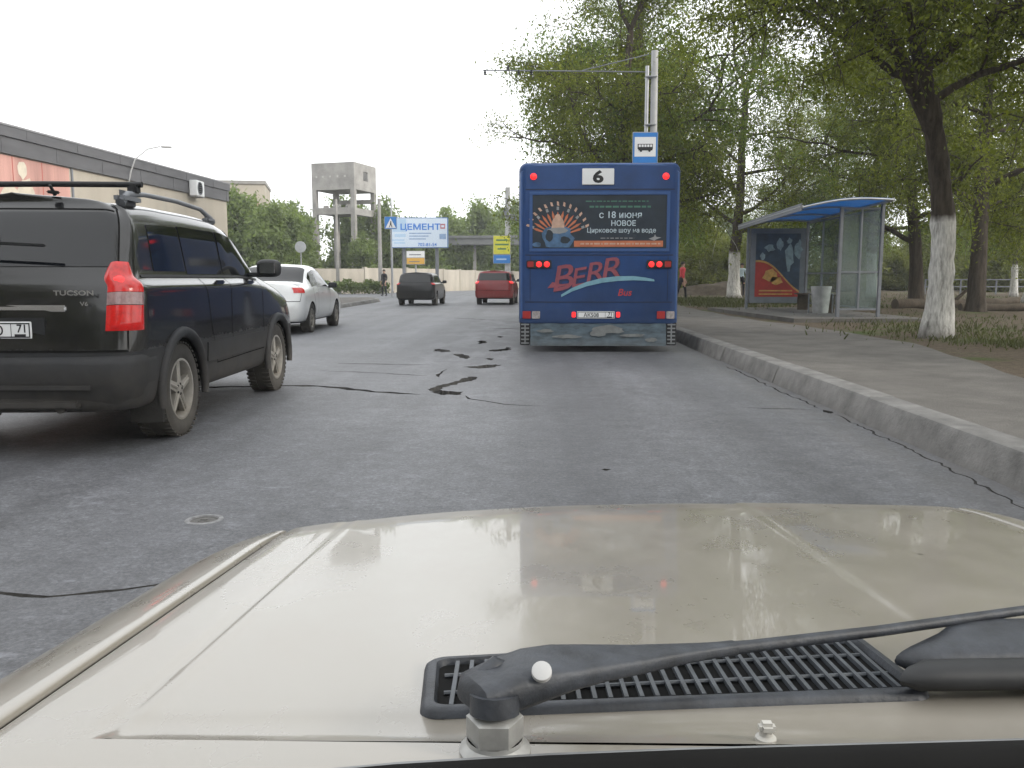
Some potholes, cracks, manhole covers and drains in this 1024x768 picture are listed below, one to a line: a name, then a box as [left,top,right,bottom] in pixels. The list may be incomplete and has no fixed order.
crack [727,367,817,410]
manhole cover [184,514,224,525]
crack [835,414,1023,508]
crack [199,363,447,394]
pothole [428,377,477,395]
crack [0,583,160,598]
